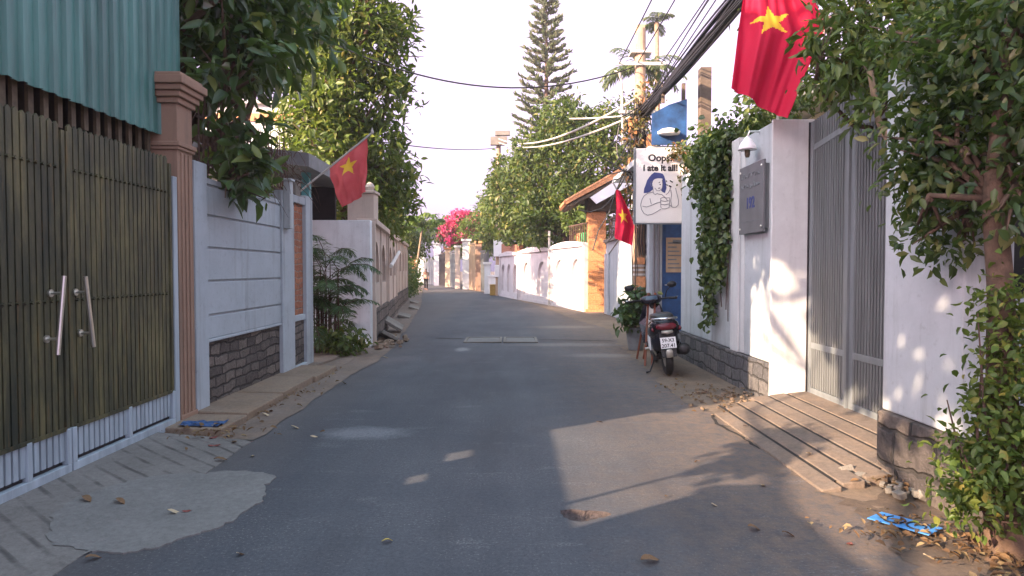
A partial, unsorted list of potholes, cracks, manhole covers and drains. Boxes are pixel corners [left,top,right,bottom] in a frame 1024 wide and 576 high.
pothole [560,509,611,522]
